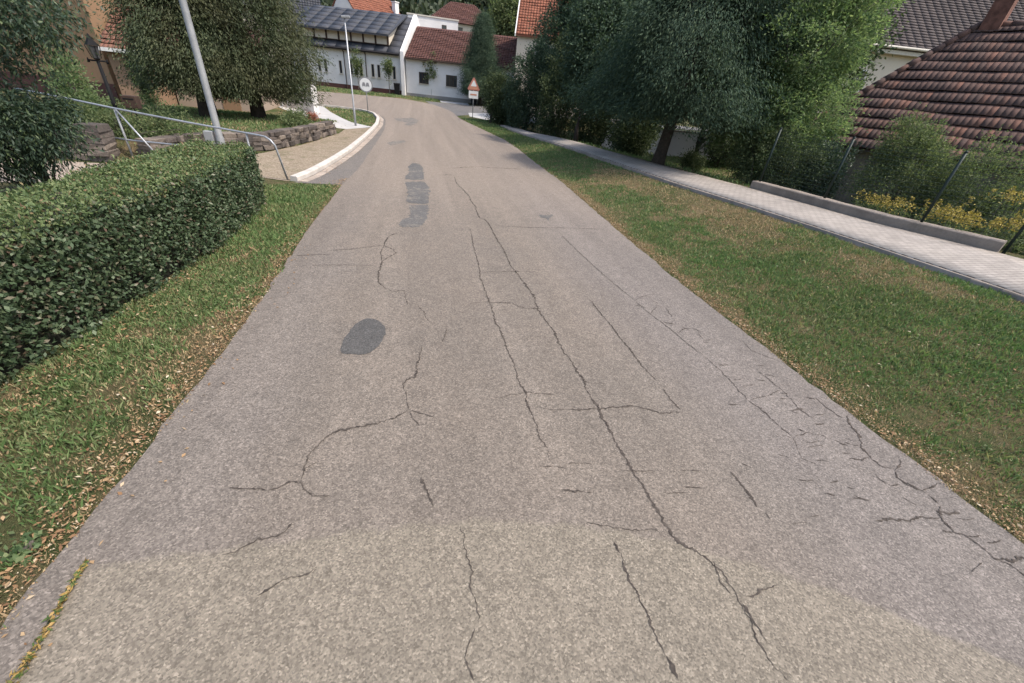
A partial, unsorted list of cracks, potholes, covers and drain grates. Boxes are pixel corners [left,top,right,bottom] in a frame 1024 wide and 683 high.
crack [420,477,433,505]
crack [230,231,447,496]
crack [455,179,789,681]
crack [560,233,1024,575]
crack [223,523,292,555]
